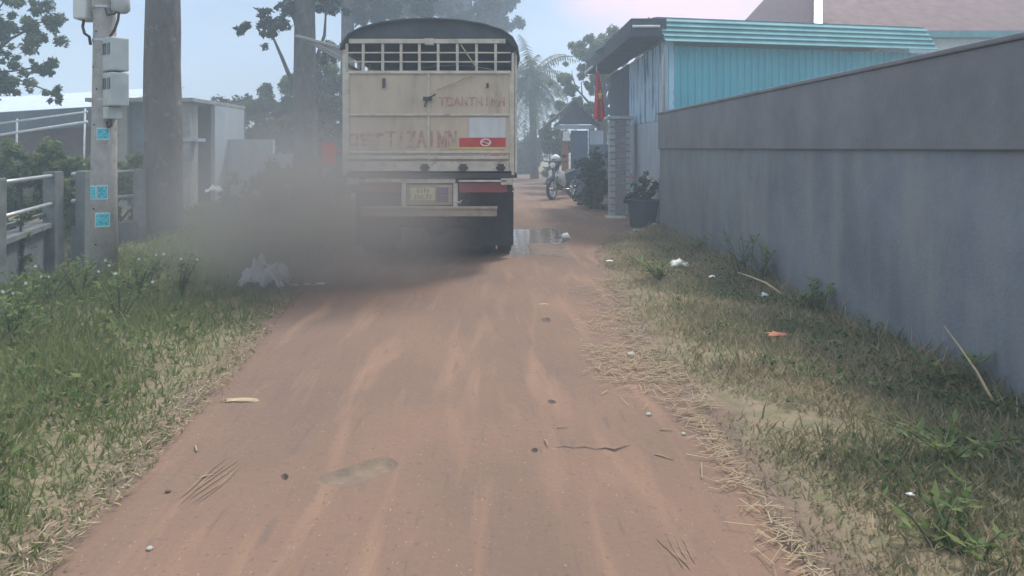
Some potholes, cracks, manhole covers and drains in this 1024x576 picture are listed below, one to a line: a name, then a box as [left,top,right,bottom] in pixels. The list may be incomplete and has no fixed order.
pothole [506,226,570,257]
